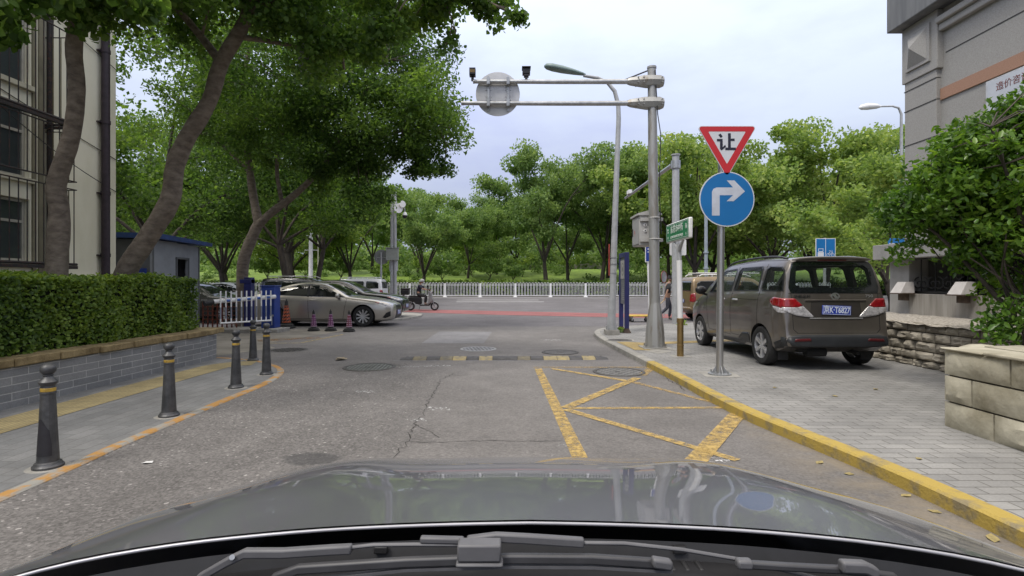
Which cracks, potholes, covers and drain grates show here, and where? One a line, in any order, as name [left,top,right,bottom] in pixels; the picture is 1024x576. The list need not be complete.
manhole cover [335,362,402,372]
crack [393,374,502,458]
manhole cover [593,367,646,377]
